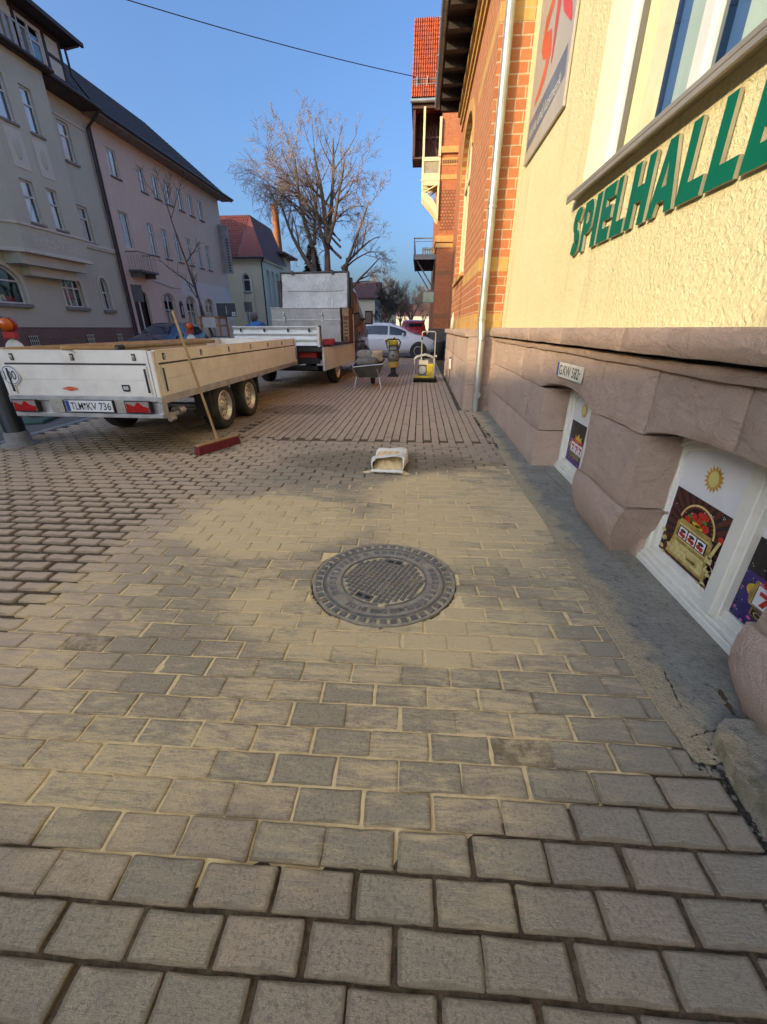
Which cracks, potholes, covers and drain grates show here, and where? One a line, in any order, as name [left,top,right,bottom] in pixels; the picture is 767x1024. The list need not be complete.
manhole cover [313,544,455,628]
